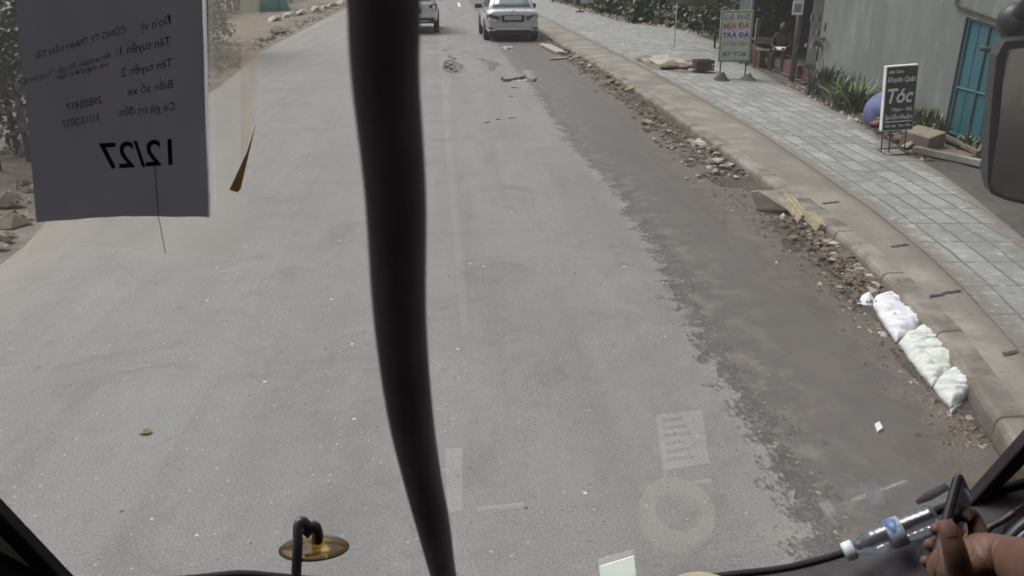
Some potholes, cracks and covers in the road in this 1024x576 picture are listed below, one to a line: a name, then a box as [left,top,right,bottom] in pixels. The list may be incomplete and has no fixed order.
pothole [442,59,464,74]
